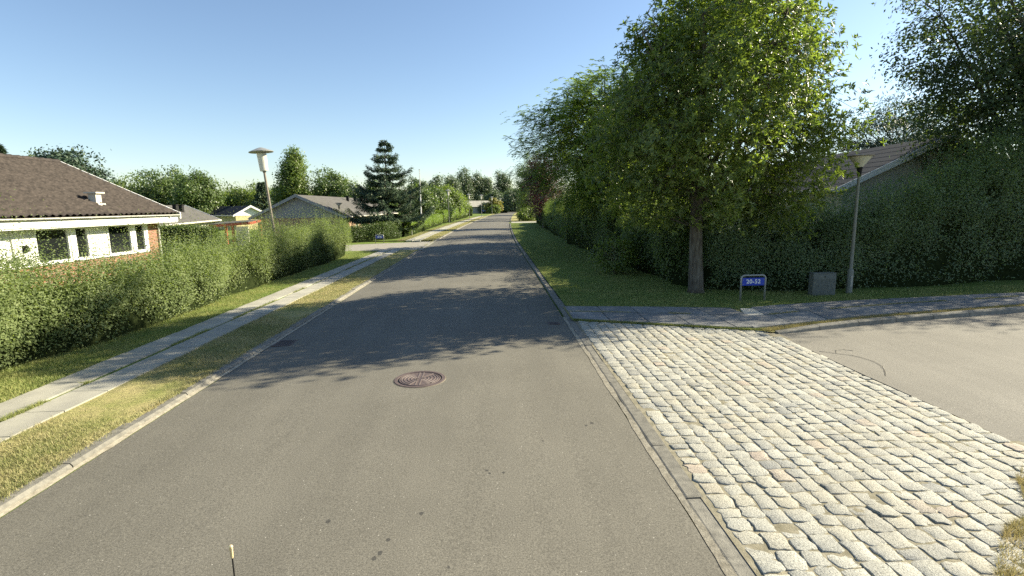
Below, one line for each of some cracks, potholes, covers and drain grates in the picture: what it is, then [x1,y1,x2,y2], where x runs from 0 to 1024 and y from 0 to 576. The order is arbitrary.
crack [819,349,886,376]
manhole cover [393,371,446,388]
